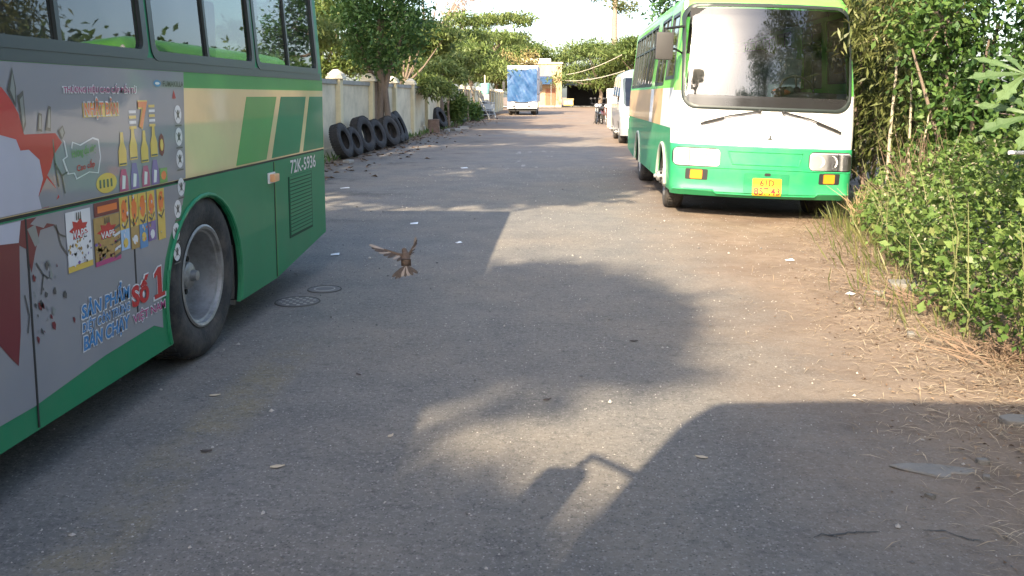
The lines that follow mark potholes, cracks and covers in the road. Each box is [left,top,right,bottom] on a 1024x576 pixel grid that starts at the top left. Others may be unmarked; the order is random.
manhole cover [307,285,342,293]
crack [814,531,877,539]
manhole cover [274,296,321,307]
